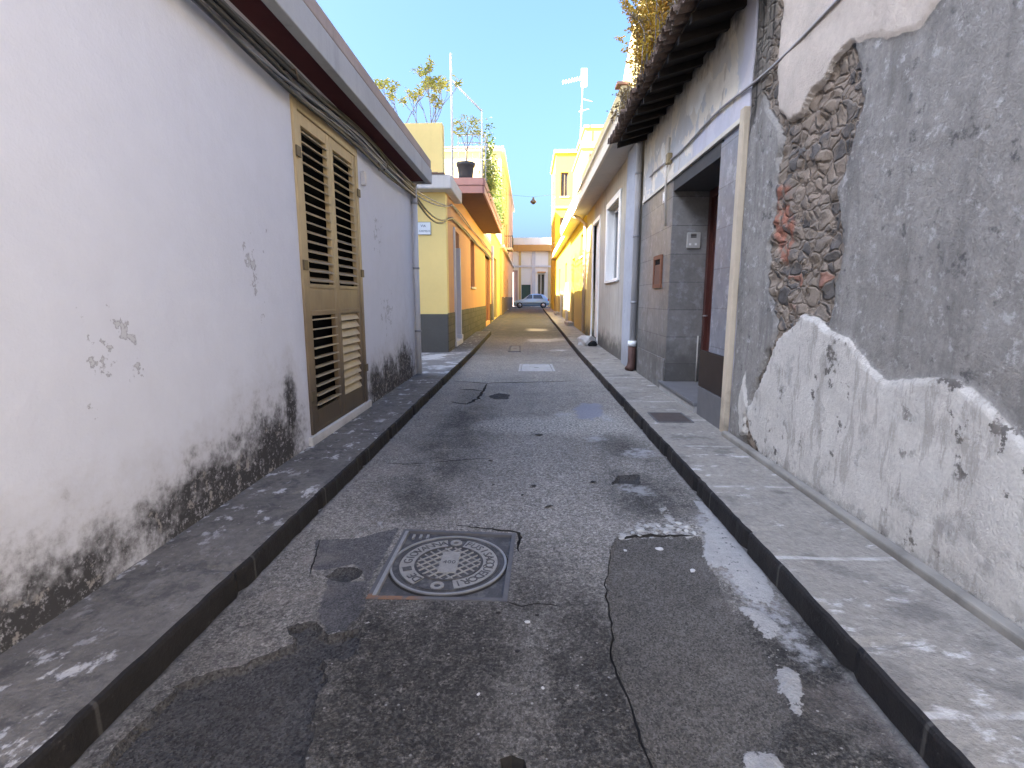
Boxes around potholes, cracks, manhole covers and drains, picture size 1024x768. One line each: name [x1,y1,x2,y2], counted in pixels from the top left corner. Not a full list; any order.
crack [604,534,699,768]
pothole [326,567,363,582]
crack [453,381,554,404]
manhole cover [647,412,694,423]
crack [457,525,522,552]
manhole cover [366,529,516,602]
pothole [500,755,527,768]
